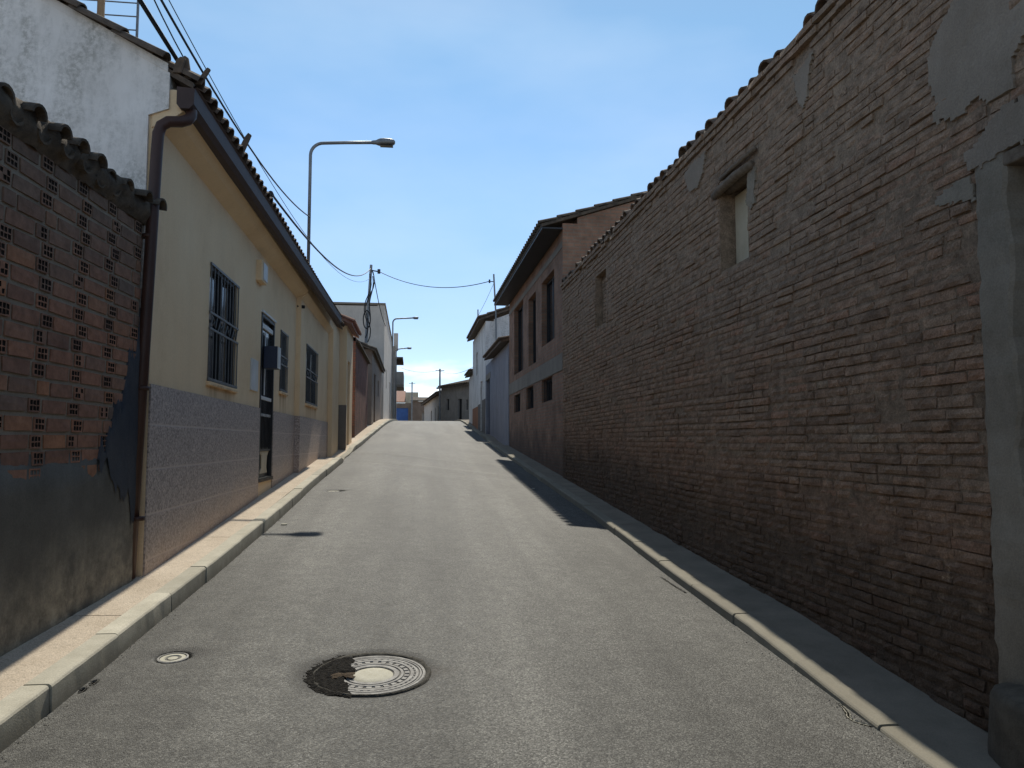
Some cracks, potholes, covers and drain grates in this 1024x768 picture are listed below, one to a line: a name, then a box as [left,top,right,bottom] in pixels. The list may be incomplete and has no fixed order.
utility cover [157,652,189,664]
manhole cover [302,652,431,698]
crack [840,704,871,727]
